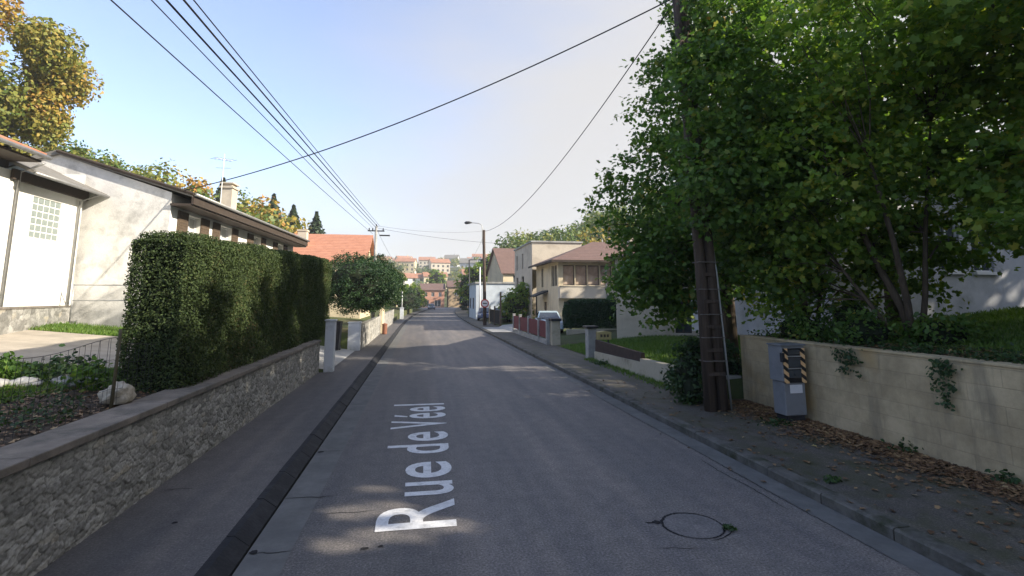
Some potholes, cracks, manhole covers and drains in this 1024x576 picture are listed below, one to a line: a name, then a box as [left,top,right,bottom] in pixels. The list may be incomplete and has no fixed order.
manhole cover [660,512,725,539]
